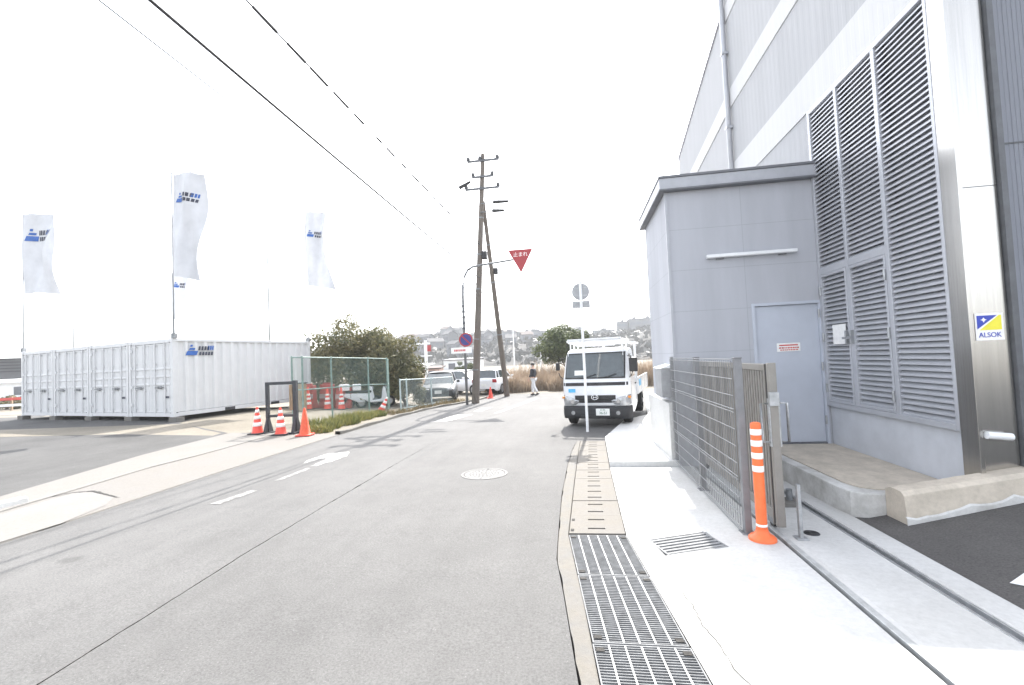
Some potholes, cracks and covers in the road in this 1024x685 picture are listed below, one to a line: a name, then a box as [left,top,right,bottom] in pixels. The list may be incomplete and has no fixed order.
drain grate [592,644,712,685]
drain grate [569,535,649,577]
drain grate [647,531,729,556]
manhole cover [461,468,508,480]
crack [683,593,751,685]
drain grate [578,575,690,648]
